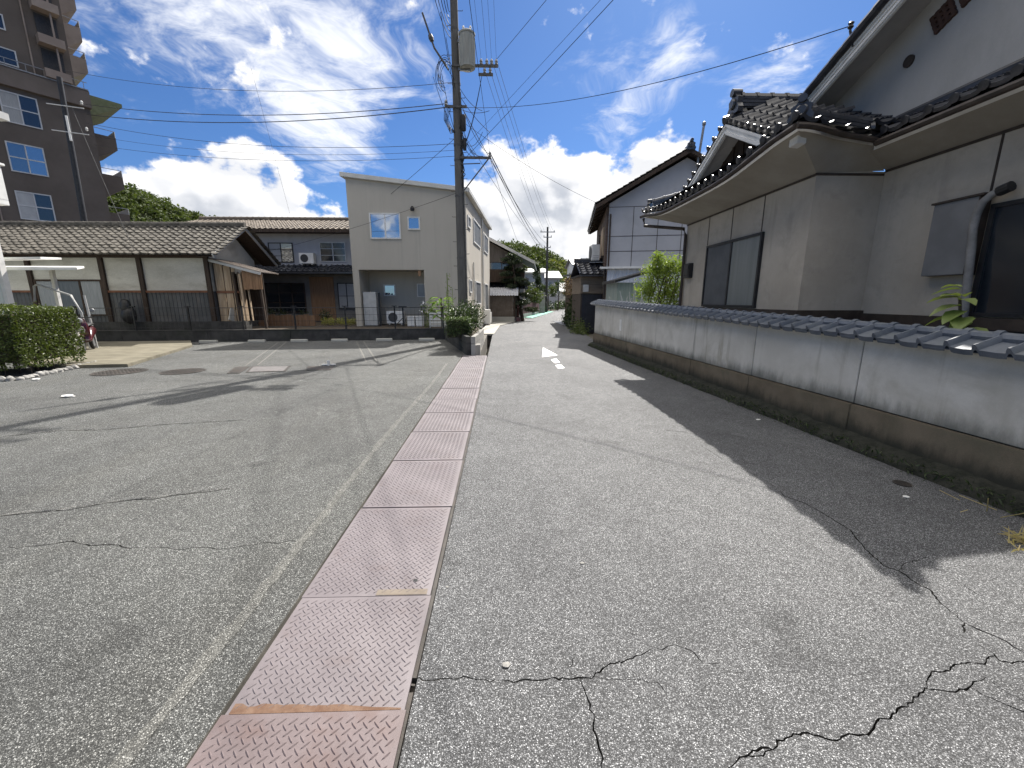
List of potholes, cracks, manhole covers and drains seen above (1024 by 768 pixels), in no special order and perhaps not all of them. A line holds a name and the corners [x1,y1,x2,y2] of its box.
manhole cover [90,368,148,376]
crack [704,447,1024,768]
crack [11,540,309,550]
crack [0,487,231,517]
crack [411,644,718,768]
